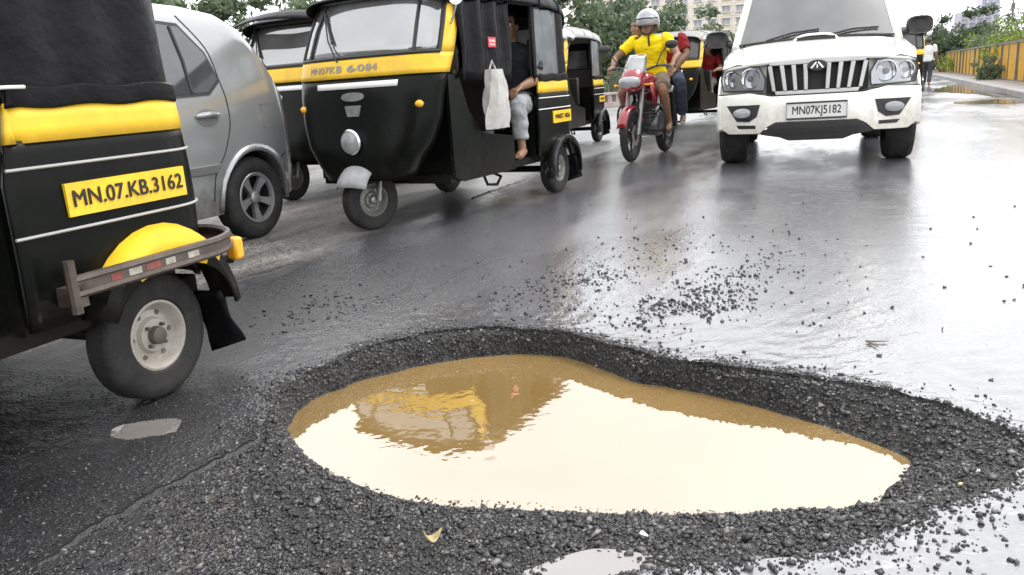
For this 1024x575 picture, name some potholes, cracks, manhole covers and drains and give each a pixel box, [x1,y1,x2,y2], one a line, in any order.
pothole [243,326,1024,575]
crack [29,437,290,575]
